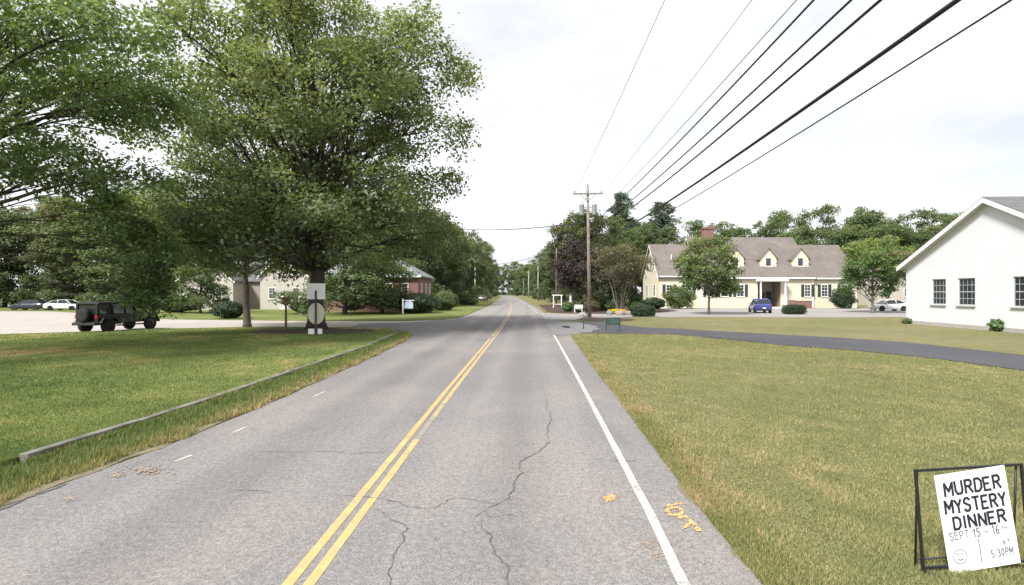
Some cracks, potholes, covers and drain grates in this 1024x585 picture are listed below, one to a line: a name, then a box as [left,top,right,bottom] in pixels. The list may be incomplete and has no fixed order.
crack [335,403,552,585]
